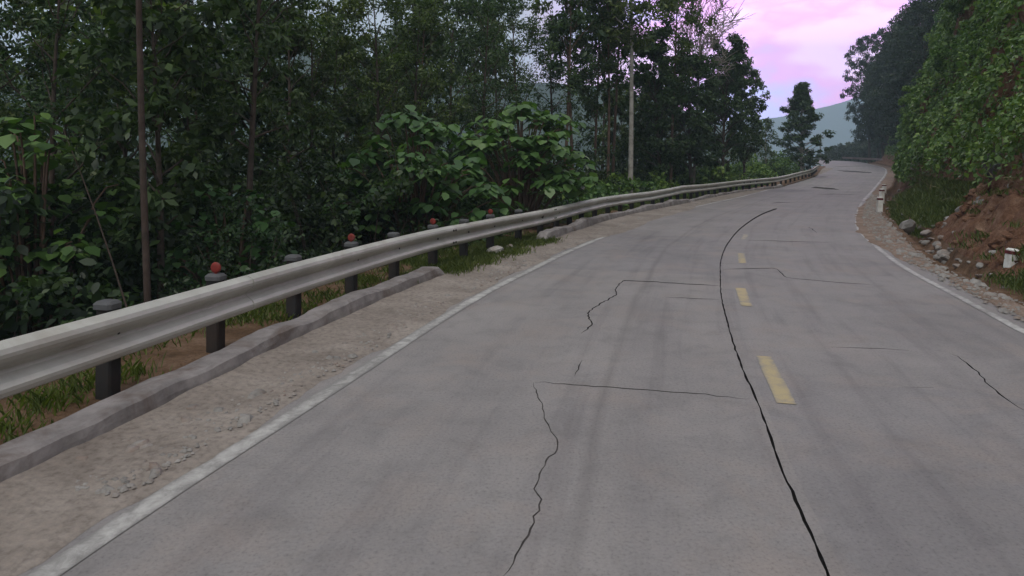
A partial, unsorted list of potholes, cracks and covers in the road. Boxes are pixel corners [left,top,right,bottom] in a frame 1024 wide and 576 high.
crack [960,358,1018,407]
crack [506,362,740,573]
